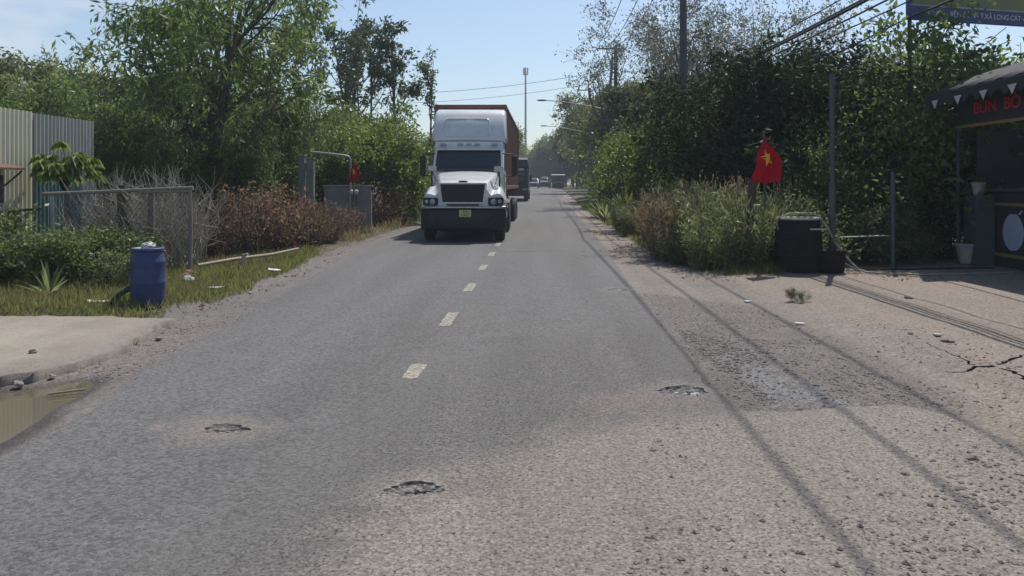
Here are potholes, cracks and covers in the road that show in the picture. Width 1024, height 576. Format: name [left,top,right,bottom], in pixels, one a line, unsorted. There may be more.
pothole [204,423,252,434]
pothole [383,481,445,497]
crack [927,343,1024,380]
pothole [654,385,710,396]
